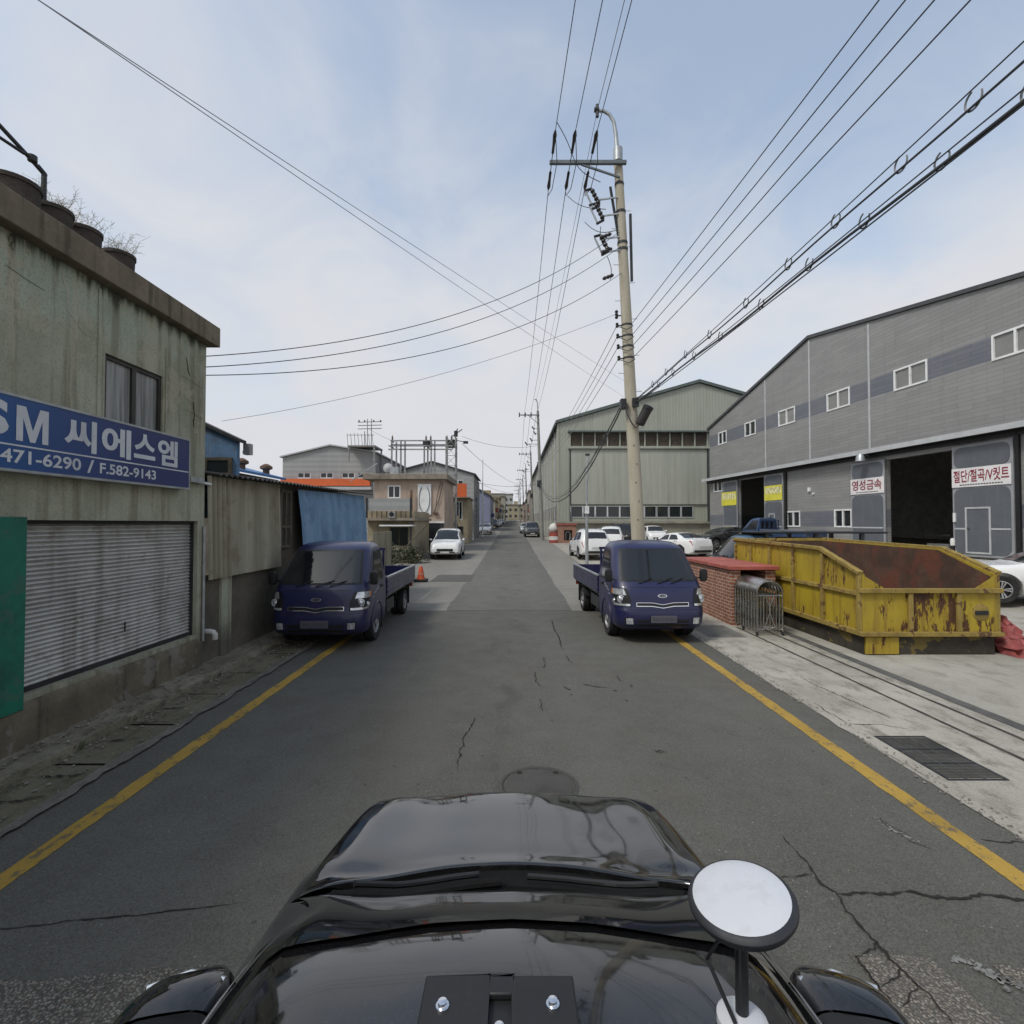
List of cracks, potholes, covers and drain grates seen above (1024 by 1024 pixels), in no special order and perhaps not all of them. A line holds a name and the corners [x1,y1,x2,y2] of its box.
manhole cover [499,766,579,795]
crack [456,718,475,769]
crack [534,620,573,710]
crack [781,818,1024,1024]
crack [0,902,245,929]
drain grate [874,736,1009,781]
